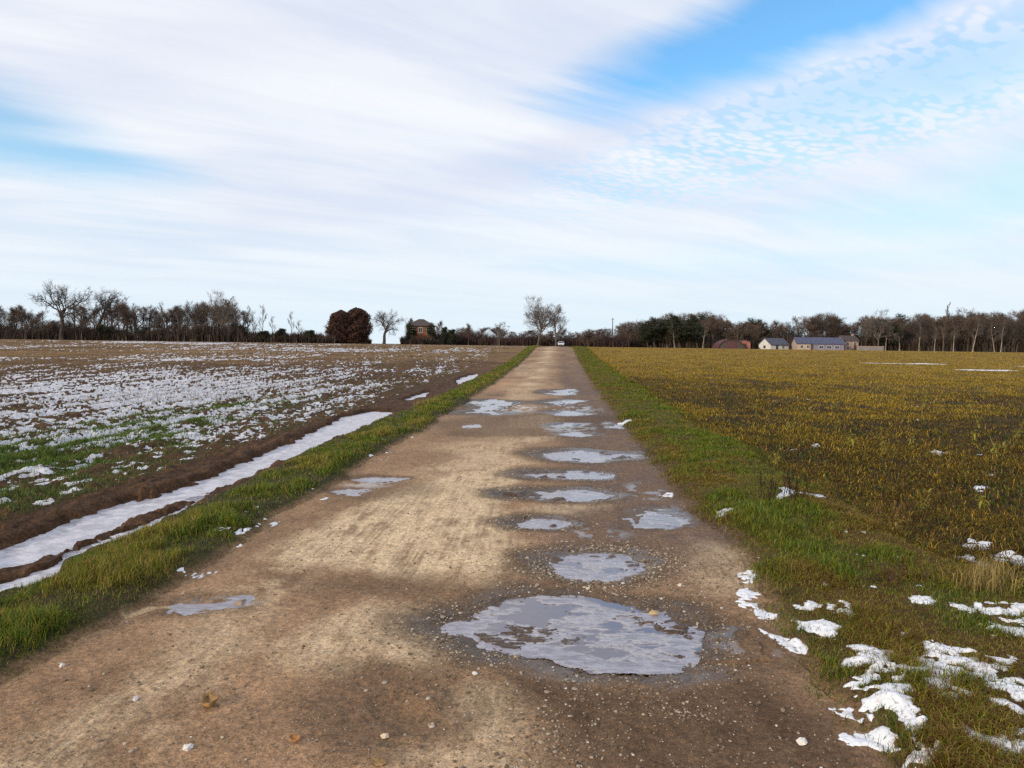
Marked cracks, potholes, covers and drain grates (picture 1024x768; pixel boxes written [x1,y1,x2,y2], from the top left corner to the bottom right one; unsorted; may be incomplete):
pothole [407,586,738,685]
pothole [449,399,530,415]
pothole [622,504,702,531]
pothole [154,590,265,616]
pothole [525,448,650,464]
pothole [346,474,411,484]
pothole [488,487,626,503]
pothole [506,468,621,481]
pothole [499,513,579,530]
pothole [326,486,377,496]
pothole [528,547,664,585]
